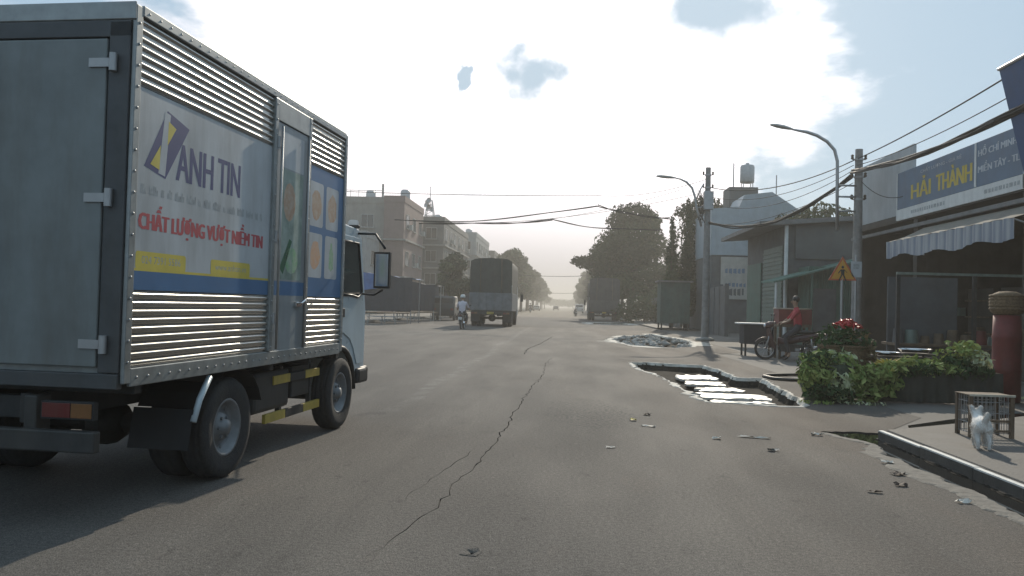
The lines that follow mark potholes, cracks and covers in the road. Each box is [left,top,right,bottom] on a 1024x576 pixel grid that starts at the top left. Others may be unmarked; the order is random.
crack [370,338,550,554]
pothole [605,334,711,348]
pothole [628,362,810,407]
